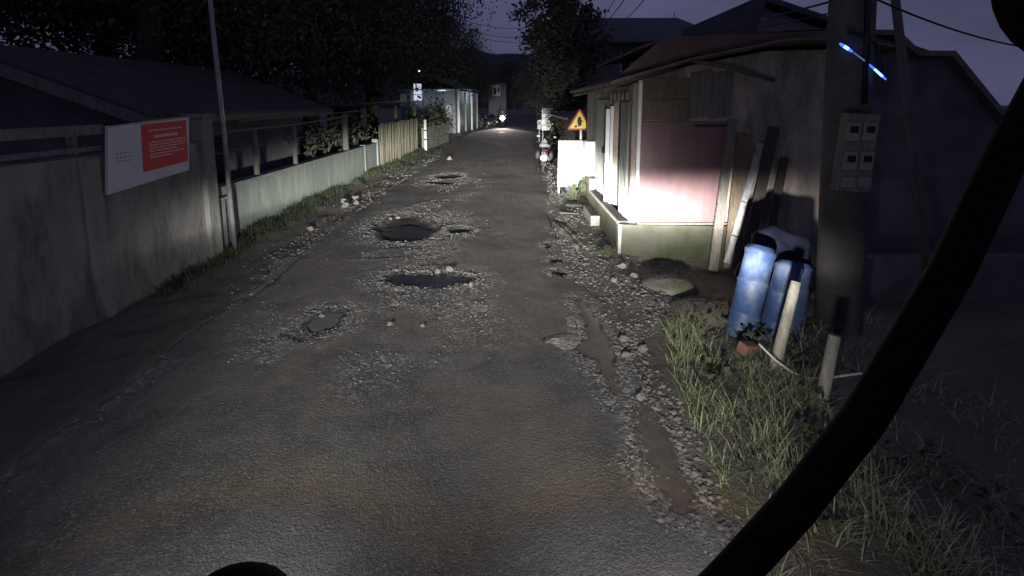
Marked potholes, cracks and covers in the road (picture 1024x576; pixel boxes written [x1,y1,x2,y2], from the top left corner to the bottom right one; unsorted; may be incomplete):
crack [242,257,301,304]
pothole [446,226,473,234]
pothole [381,271,476,289]
pothole [299,306,351,335]
pothole [369,213,445,242]
